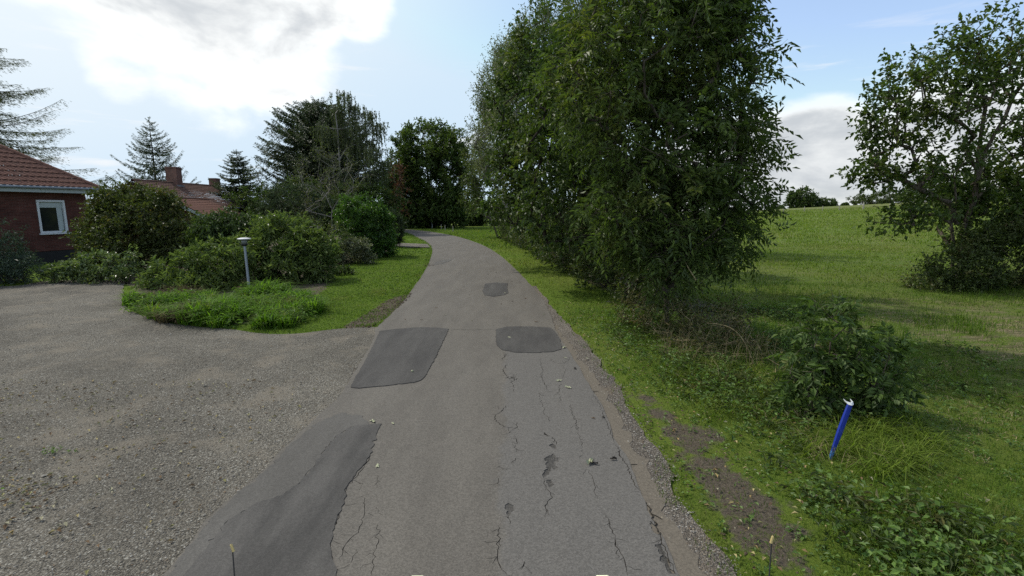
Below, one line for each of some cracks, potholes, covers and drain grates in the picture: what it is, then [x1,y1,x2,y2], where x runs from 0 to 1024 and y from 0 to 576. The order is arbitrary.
crack [539,360,583,450]
crack [330,455,384,575]
crack [483,517,529,576]
crack [593,391,675,573]
pothole [542,454,559,477]
crack [491,406,520,485]
